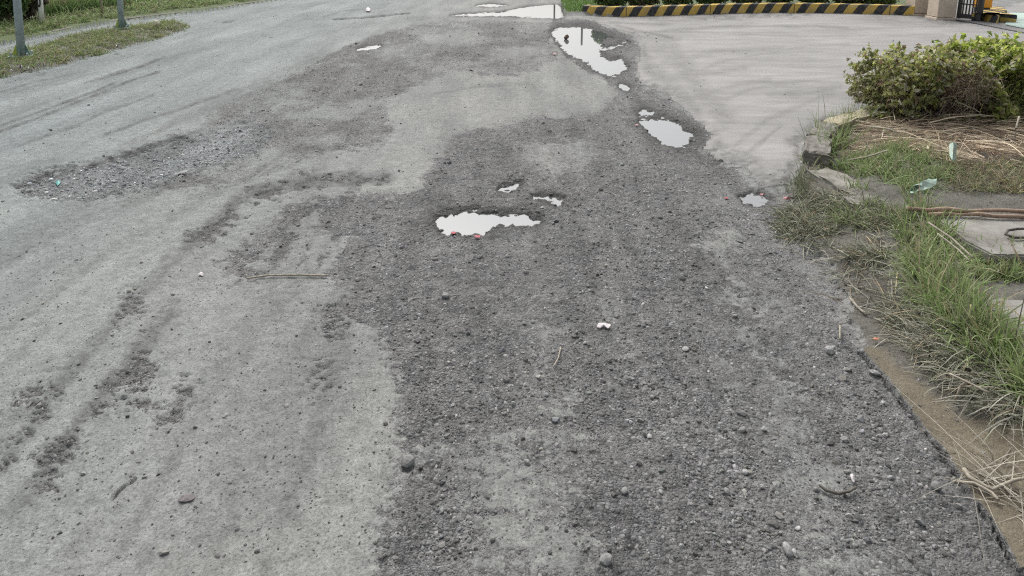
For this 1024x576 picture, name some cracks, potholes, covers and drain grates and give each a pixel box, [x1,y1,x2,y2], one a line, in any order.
pothole [5,116,279,209]
pothole [737,189,773,207]
pothole [432,205,545,237]
pothole [547,23,632,79]
pothole [450,2,565,19]
pothole [530,190,566,207]
pothole [496,179,524,193]
pothole [634,106,703,149]
